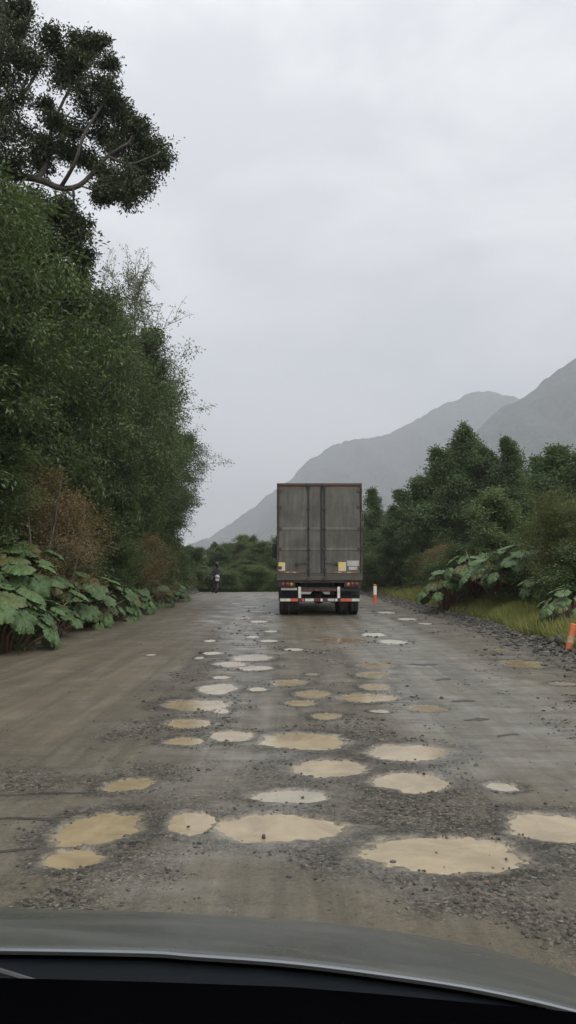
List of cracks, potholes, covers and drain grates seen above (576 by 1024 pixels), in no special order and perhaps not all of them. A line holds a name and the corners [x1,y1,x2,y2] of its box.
pothole [325,691,413,705]
pothole [317,828,574,886]
pothole [156,807,225,842]
pothole [271,754,387,783]
pothole [26,845,122,874]
pothole [487,807,576,851]
pothole [189,681,246,698]
pothole [153,716,221,731]
pothole [148,697,245,714]
pothole [194,806,384,851]
pothole [230,786,348,807]
pothole [353,768,472,799]
